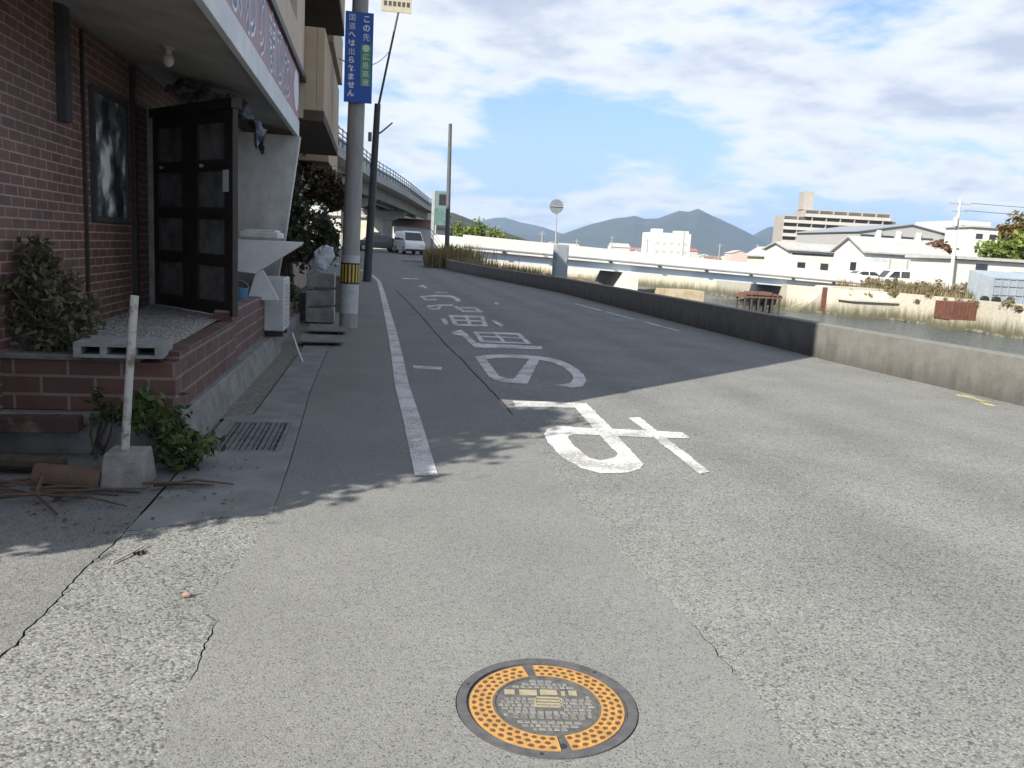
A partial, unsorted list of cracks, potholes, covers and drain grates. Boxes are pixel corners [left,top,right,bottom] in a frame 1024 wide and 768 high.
crack [689,621,750,690]
manhole cover [456,658,638,760]
crack [186,620,218,686]
crack [0,511,145,658]
drain grate [210,421,292,452]
